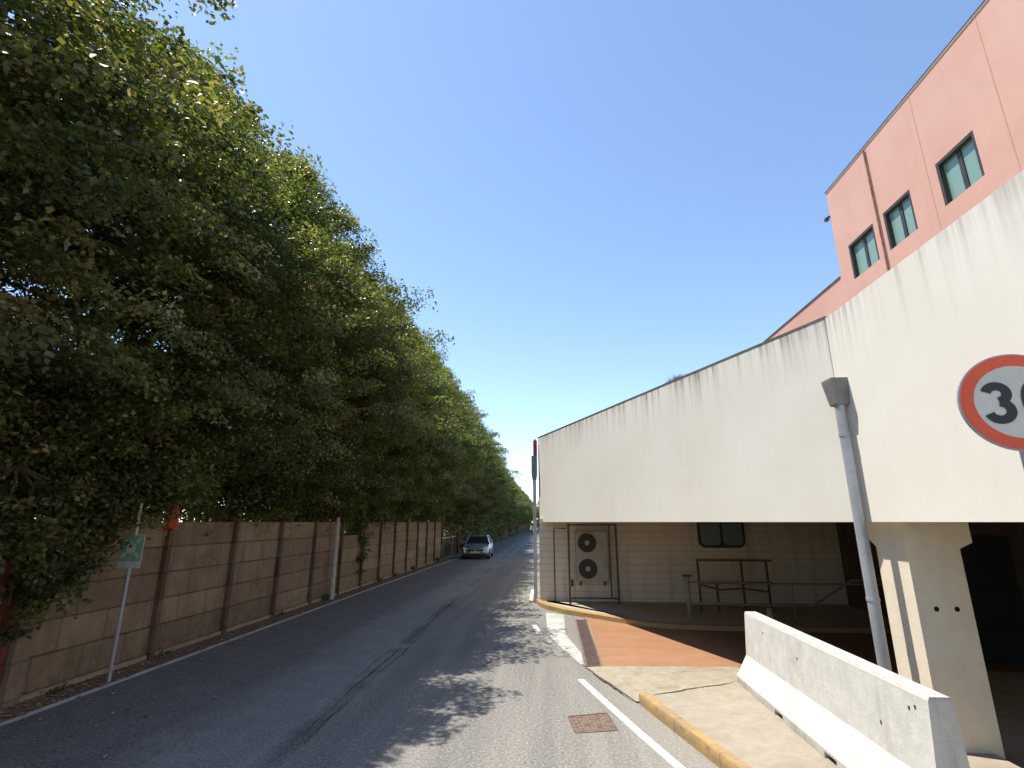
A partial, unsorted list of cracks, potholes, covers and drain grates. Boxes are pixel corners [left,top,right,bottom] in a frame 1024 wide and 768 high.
manhole cover [567,712,619,734]
